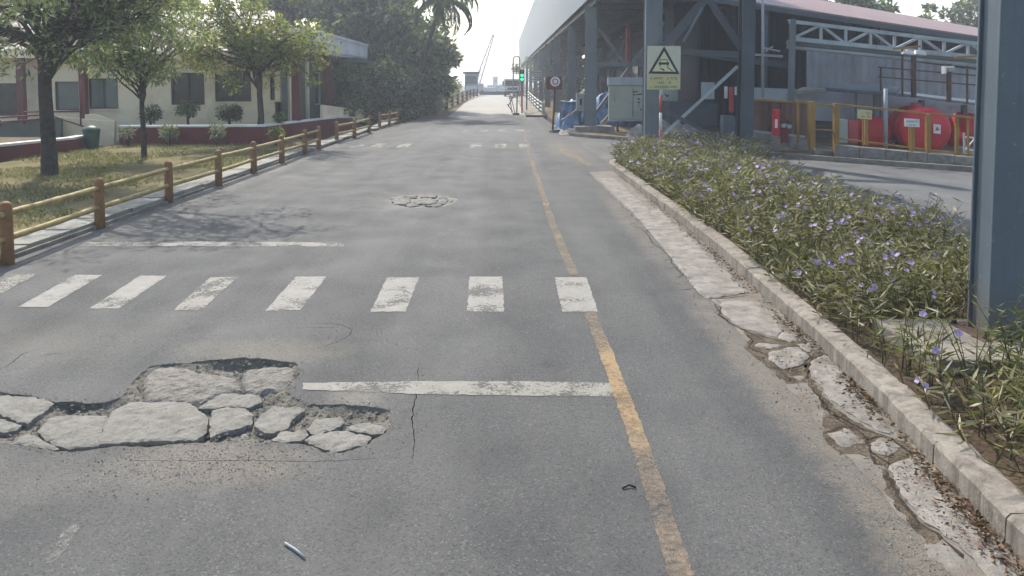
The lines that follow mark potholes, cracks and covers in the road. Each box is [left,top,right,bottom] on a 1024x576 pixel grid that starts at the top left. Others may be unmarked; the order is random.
pothole [0,355,398,456]
crack [411,364,419,458]
pothole [389,194,458,208]
